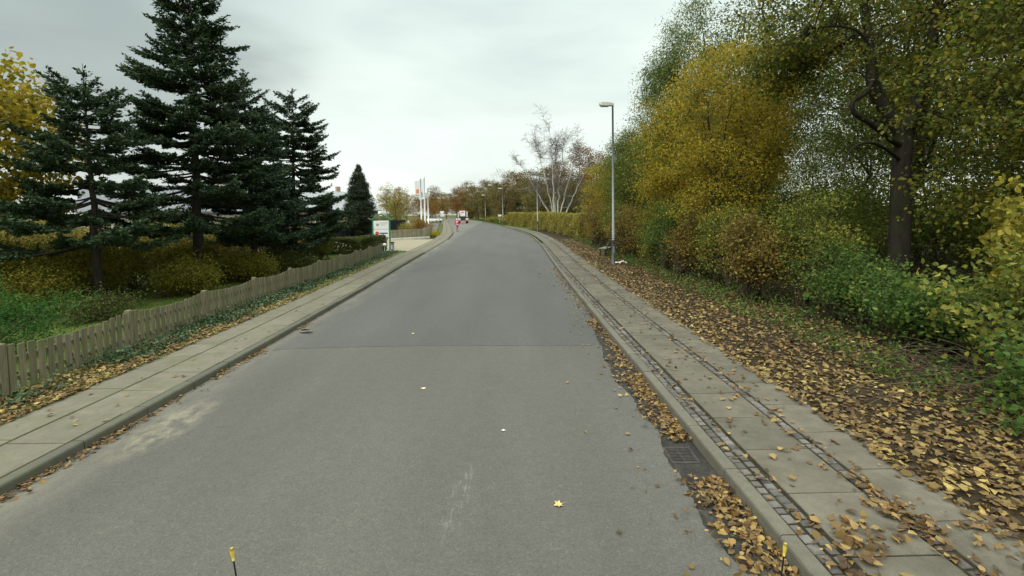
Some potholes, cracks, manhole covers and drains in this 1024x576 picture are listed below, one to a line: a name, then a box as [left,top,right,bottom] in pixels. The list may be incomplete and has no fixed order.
drain grate [663,447,701,464]
